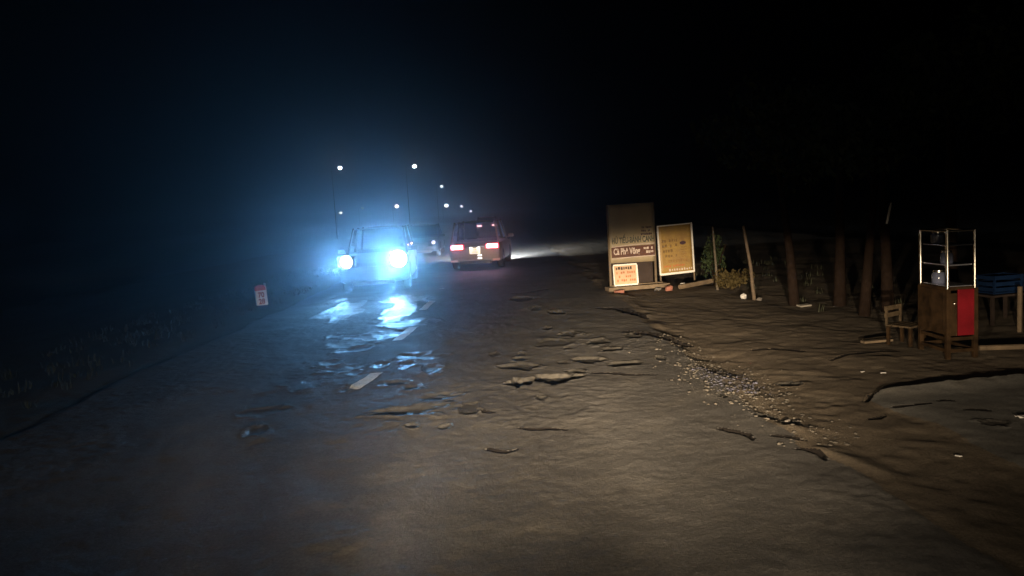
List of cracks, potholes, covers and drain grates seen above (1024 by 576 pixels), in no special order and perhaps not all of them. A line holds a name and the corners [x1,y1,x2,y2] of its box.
pothole [584,337,617,346]
pothole [459,400,484,415]
pothole [365,401,452,416]
pothole [567,356,609,364]
pothole [496,361,541,371]
pothole [509,370,589,385]
